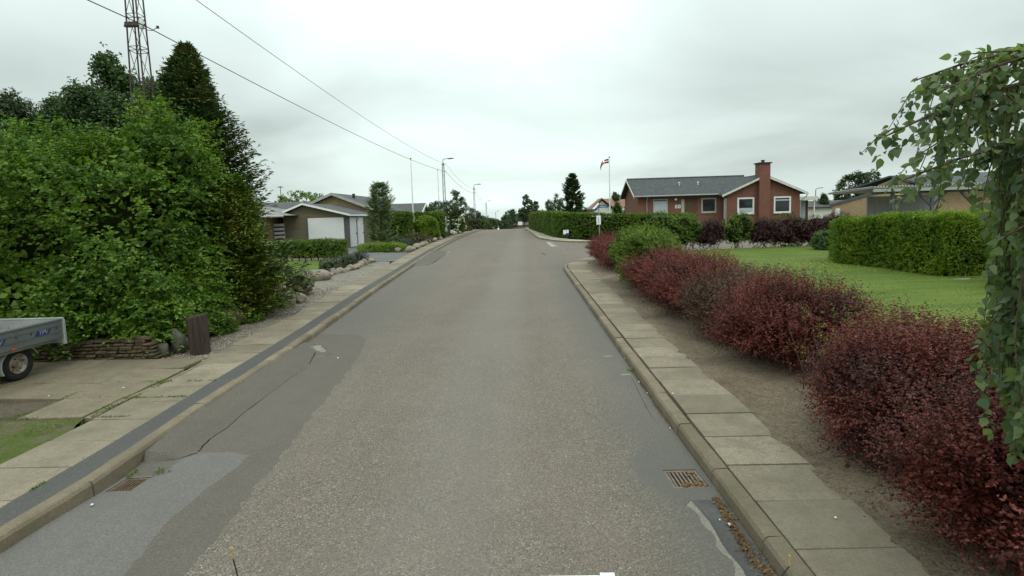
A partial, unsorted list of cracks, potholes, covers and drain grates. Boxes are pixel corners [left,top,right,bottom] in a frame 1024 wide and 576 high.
drain grate [663,470,709,488]
crack [163,352,316,461]
drain grate [107,477,152,492]
